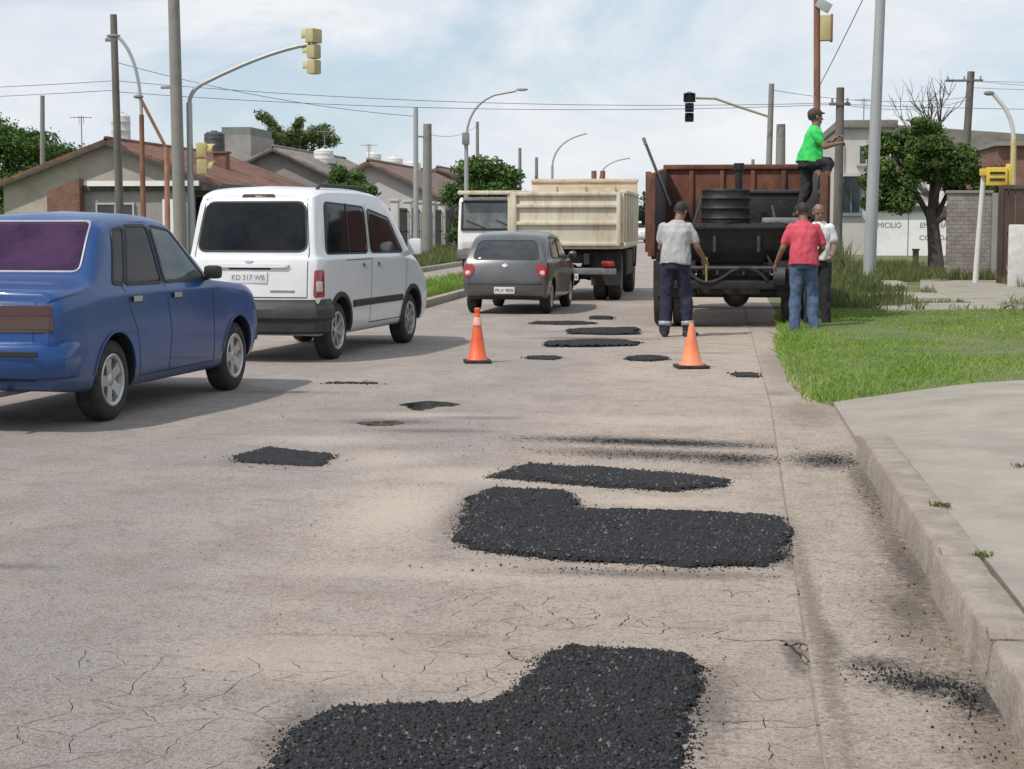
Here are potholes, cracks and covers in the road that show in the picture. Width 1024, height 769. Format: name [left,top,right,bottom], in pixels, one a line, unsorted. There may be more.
crack [711,680,820,764]
pothole [398,401,460,411]
crack [377,575,809,699]
crack [2,649,357,769]
